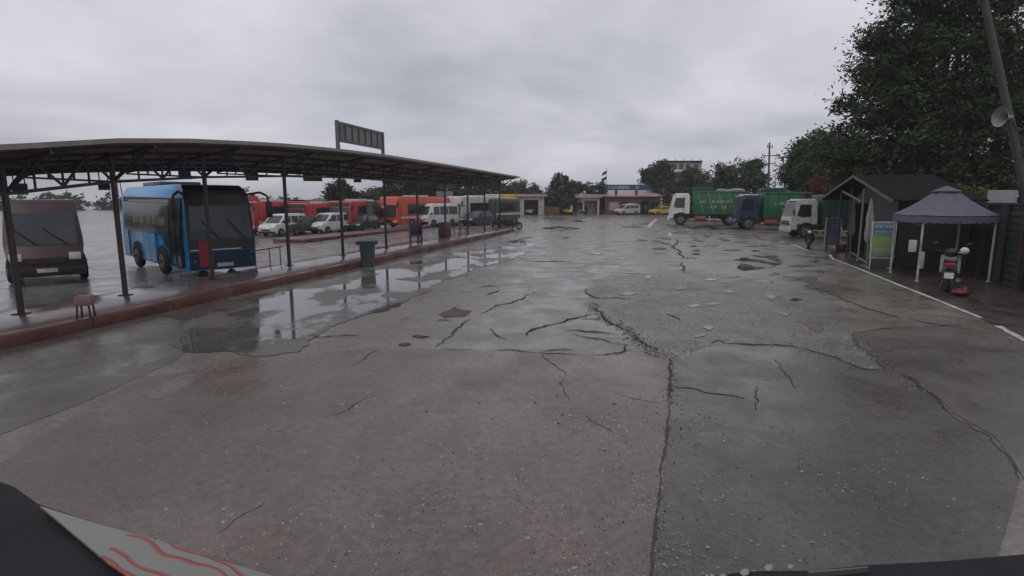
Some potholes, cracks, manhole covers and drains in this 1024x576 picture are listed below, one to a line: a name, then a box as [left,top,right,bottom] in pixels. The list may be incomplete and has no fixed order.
crack [436,285,534,351]
crack [525,288,1020,576]
